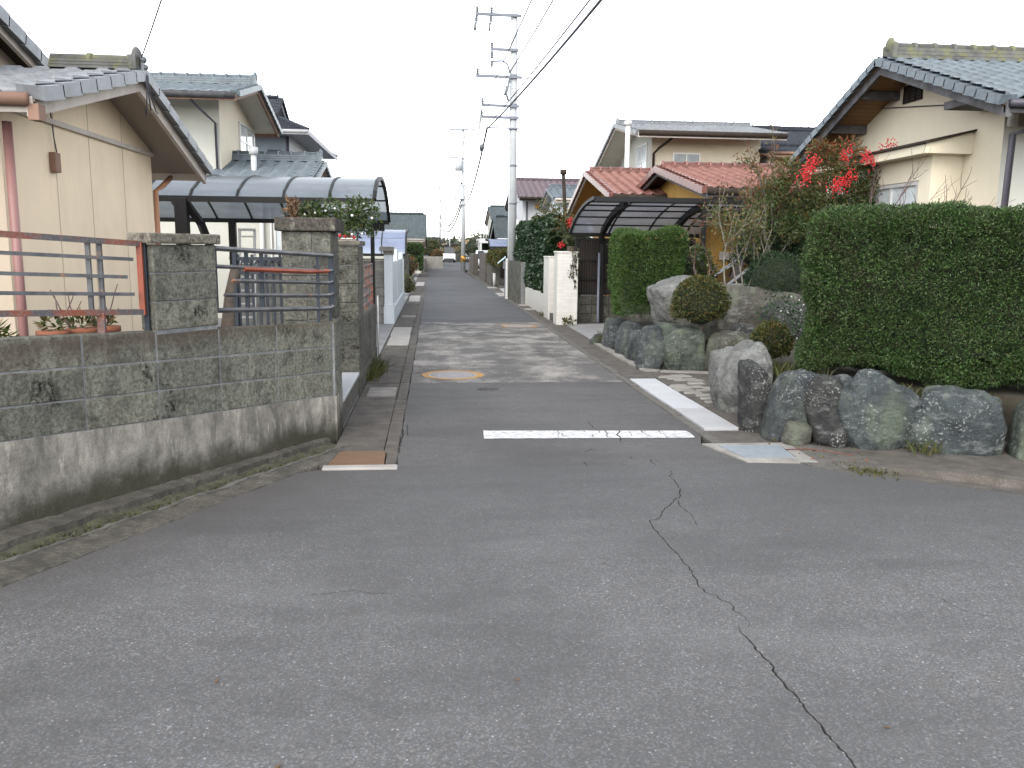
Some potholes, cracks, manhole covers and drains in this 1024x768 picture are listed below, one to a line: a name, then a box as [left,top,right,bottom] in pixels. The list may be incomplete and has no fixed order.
crack [557,422,856,768]
